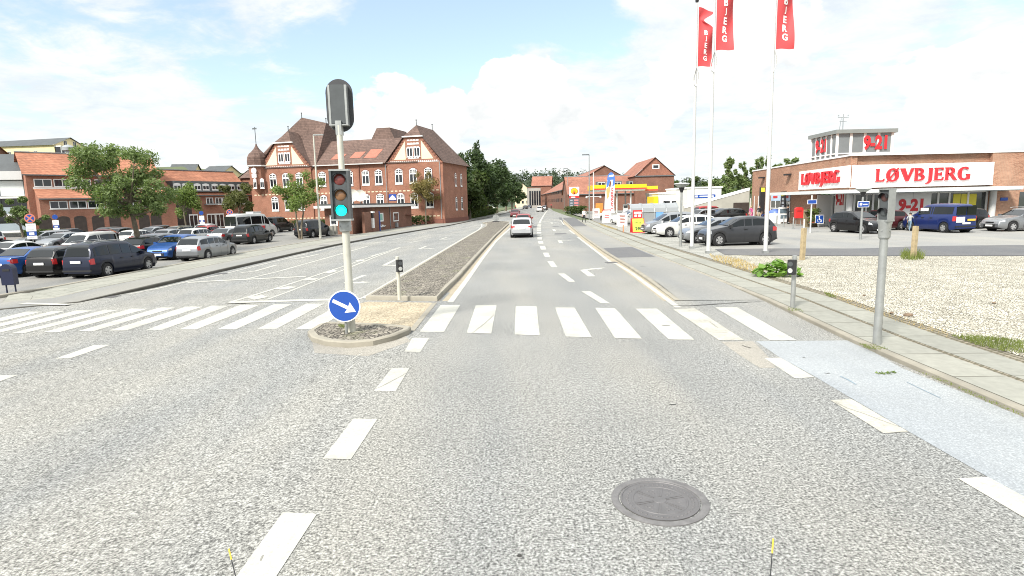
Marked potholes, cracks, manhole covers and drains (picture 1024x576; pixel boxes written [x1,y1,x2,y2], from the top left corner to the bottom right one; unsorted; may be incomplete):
manhole cover [611,478,710,527]
